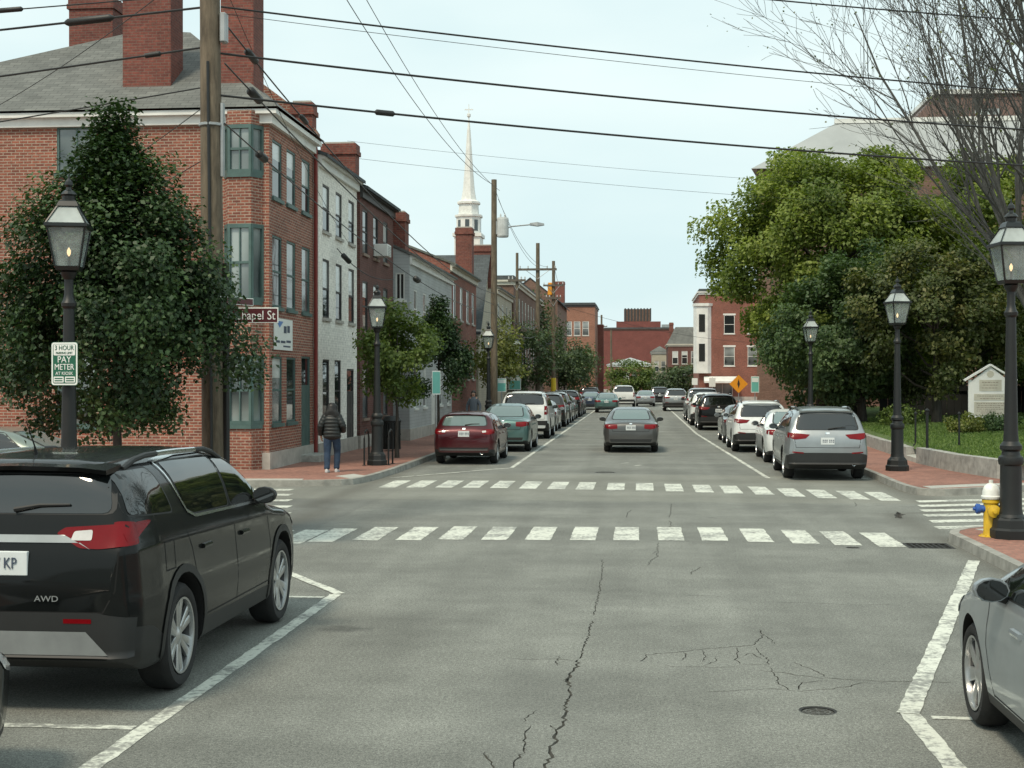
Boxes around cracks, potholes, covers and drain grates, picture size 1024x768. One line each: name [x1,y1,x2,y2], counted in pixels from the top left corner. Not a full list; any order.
utility cover [799,706,837,715]
crack [510,561,604,768]
crack [640,631,945,692]
